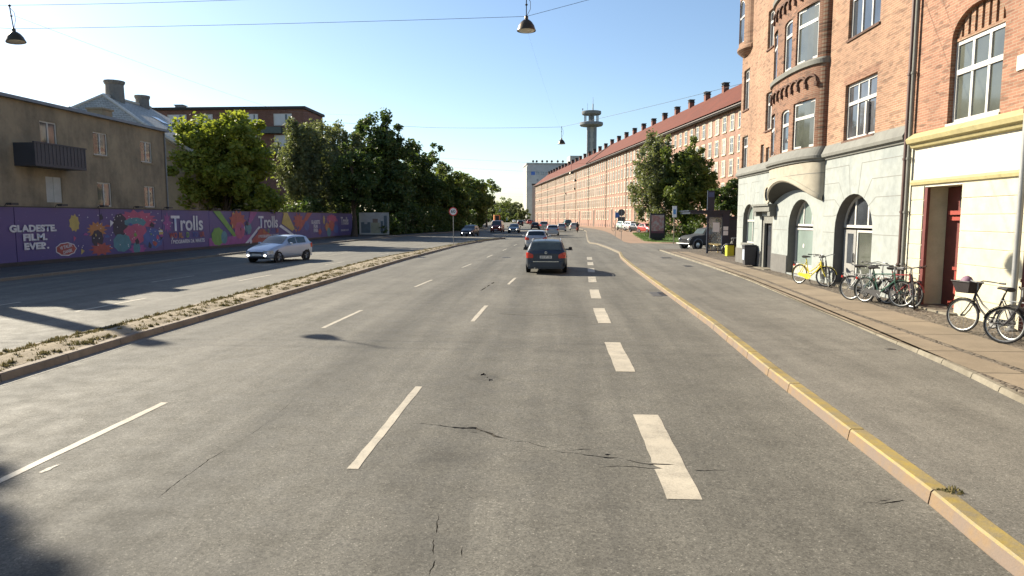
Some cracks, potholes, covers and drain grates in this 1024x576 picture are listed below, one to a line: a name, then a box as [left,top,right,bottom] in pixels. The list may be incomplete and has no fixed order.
crack [420,423,713,471]
crack [429,516,439,575]
